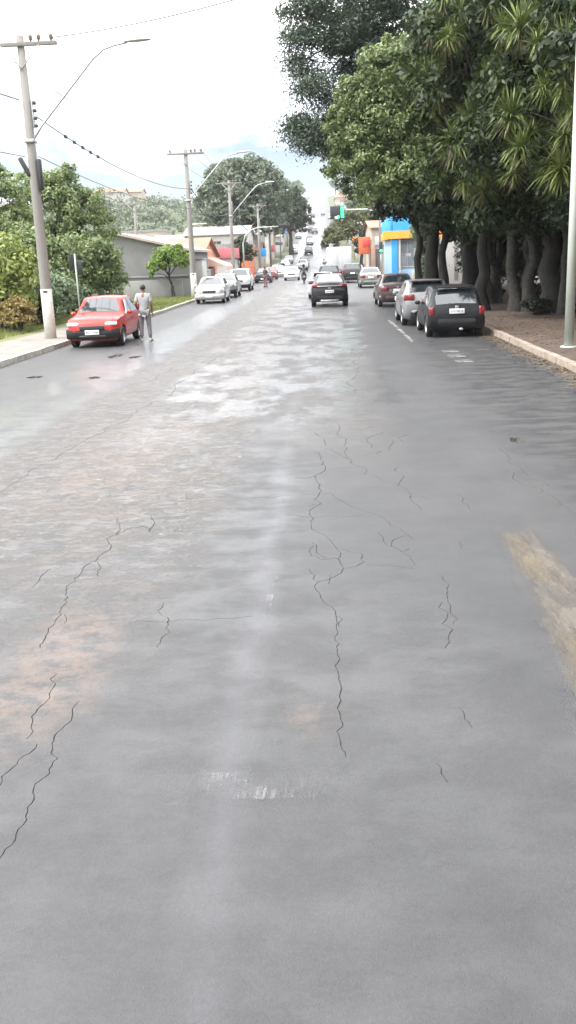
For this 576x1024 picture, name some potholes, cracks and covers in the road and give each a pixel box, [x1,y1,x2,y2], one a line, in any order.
crack [438,576,458,648]
crack [288,423,430,756]
crack [0,674,78,858]
crack [32,516,172,647]
